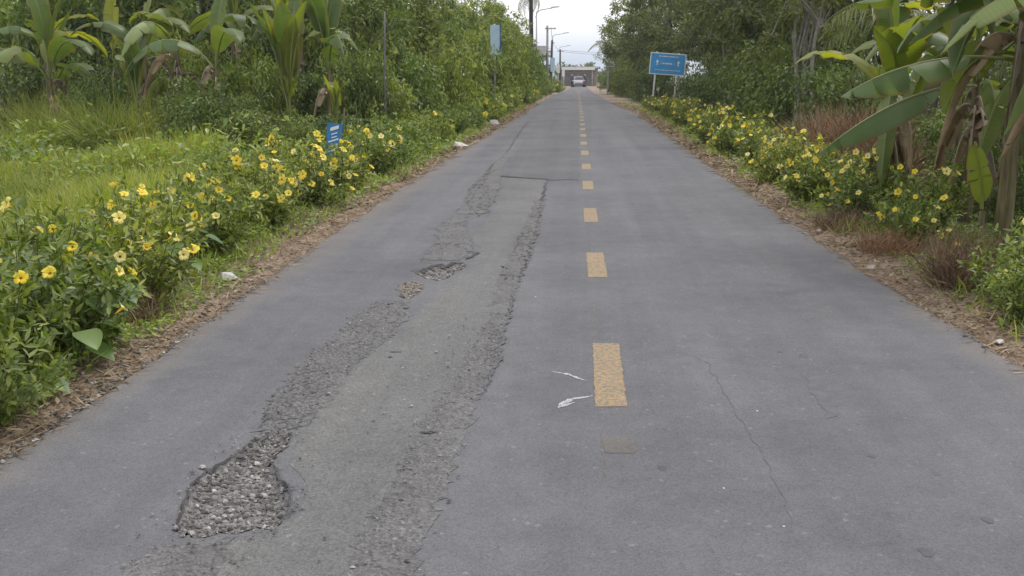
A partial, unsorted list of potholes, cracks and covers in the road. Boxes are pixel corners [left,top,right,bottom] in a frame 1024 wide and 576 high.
crack [455,165,571,398]
crack [417,242,480,271]
crack [690,352,792,529]
pothole [412,262,465,281]
crack [349,299,409,357]
pothole [397,282,423,299]
pothole [172,432,292,539]
